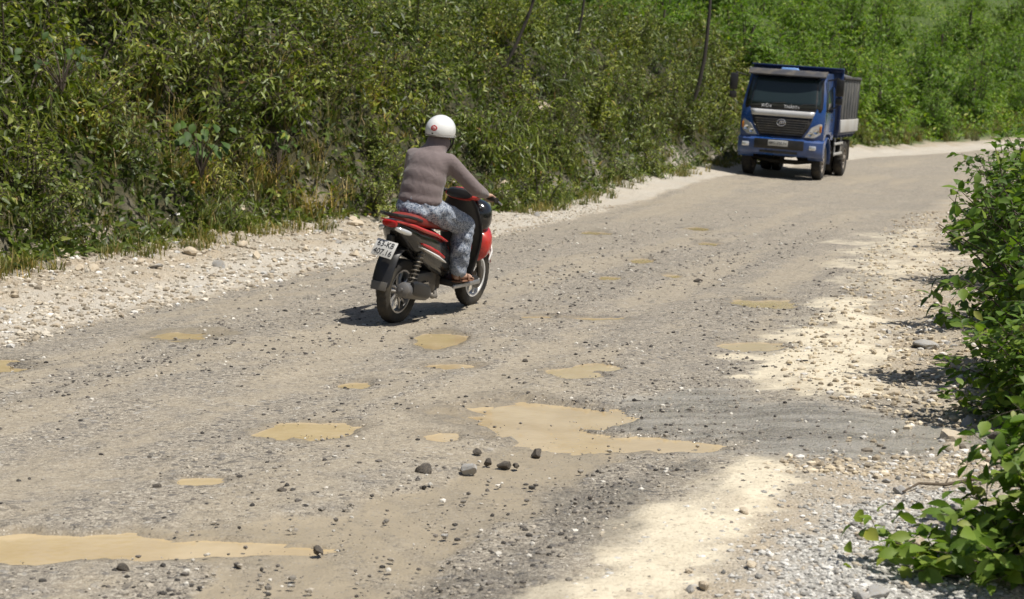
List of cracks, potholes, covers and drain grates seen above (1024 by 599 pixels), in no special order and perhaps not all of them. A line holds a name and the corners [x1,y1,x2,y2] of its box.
pothole [244,419,373,443]
pothole [719,297,803,310]
pothole [137,326,241,343]
pothole [414,391,770,457]
pothole [534,360,624,379]
pothole [164,474,237,487]
pothole [0,522,343,566]
pothole [330,378,377,390]
pothole [709,340,794,352]
pothole [420,360,485,370]
pothole [409,328,472,351]
